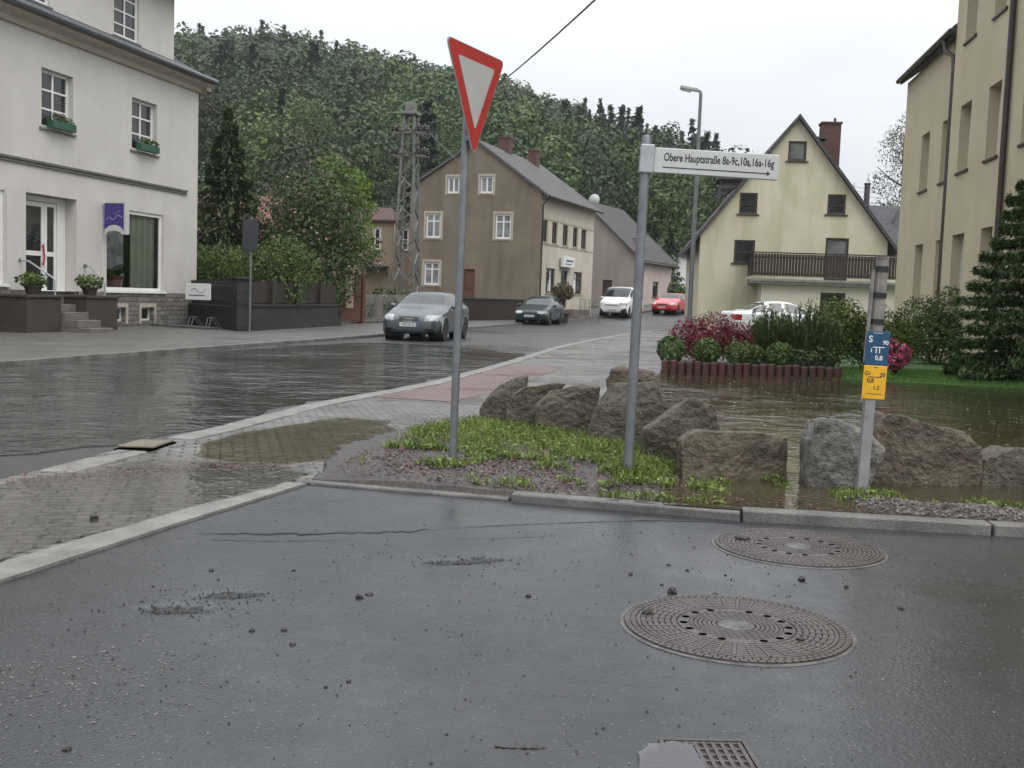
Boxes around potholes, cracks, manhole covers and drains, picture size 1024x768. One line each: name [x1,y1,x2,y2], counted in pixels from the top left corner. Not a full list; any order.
manhole cover [619,594,857,667]
pothole [426,556,503,565]
drain grate [658,738,762,768]
manhole cover [711,528,889,569]
pothole [138,605,201,614]
